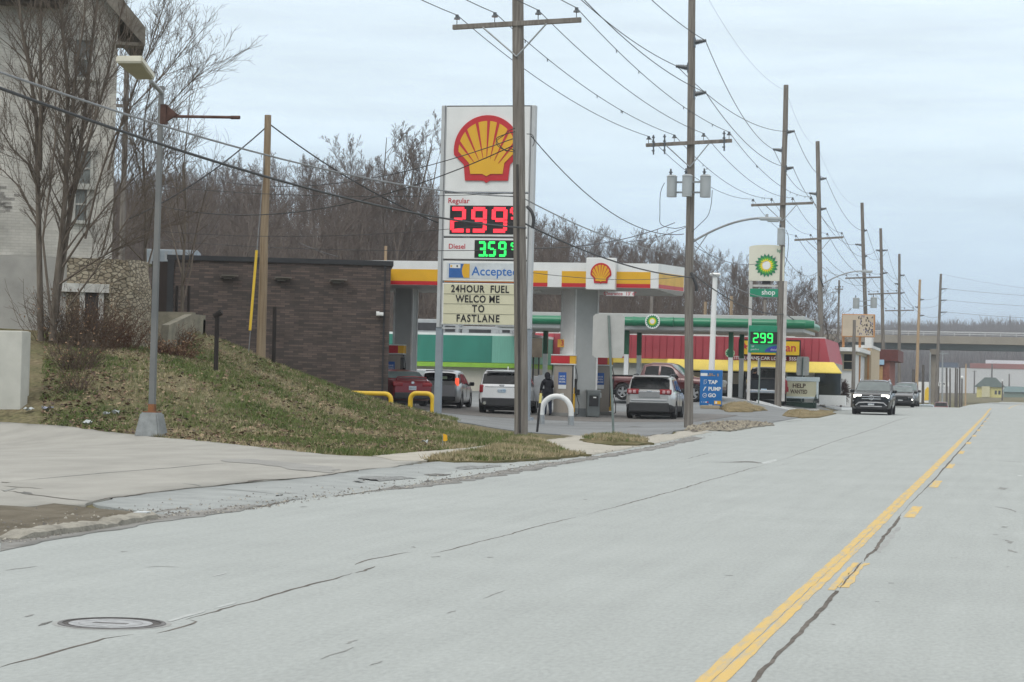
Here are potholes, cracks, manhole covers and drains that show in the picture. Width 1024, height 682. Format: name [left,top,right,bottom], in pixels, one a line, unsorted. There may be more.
manhole cover [52,617,171,630]
crack [751,414,990,682]
